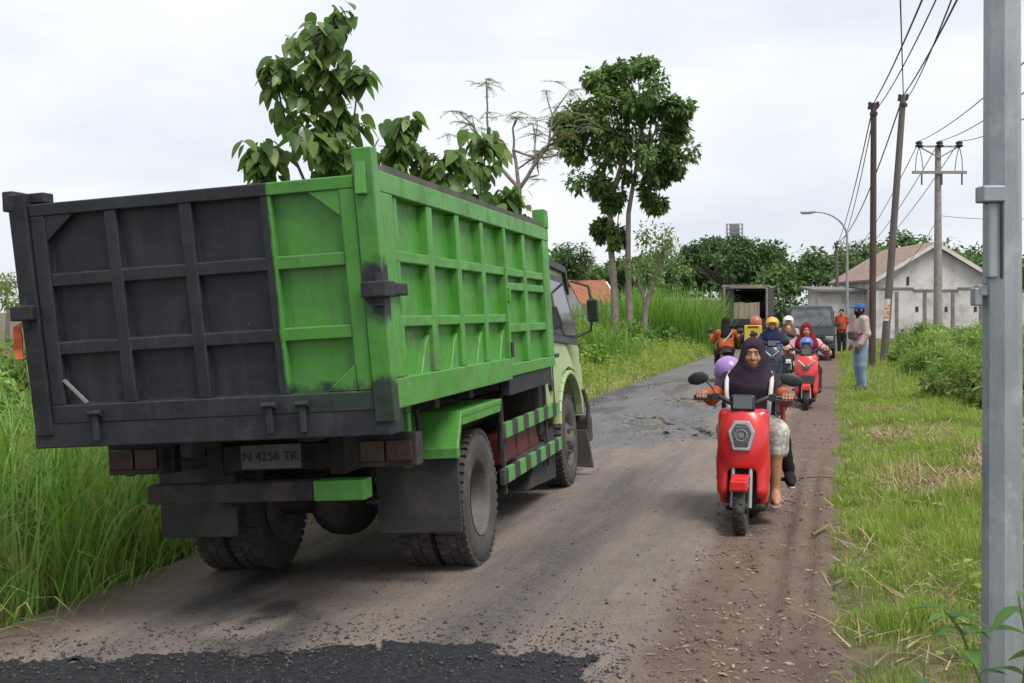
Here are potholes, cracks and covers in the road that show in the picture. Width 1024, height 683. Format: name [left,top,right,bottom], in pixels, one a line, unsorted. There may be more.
pothole [663,425,717,440]
pothole [609,413,702,442]
pothole [653,395,722,412]
